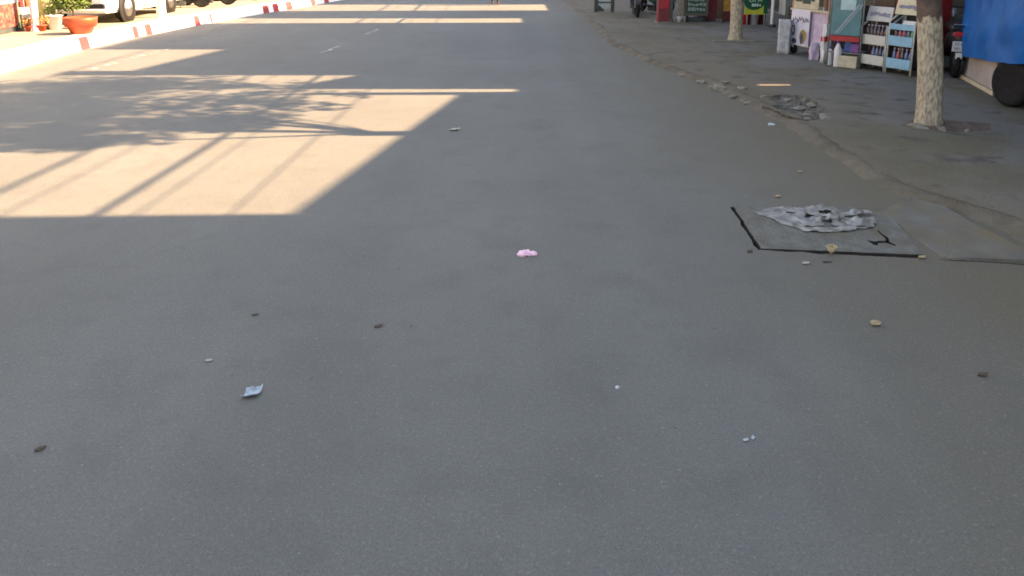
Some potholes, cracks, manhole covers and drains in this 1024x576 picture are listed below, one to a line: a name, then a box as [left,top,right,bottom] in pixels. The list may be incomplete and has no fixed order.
pothole [762,94,827,120]
